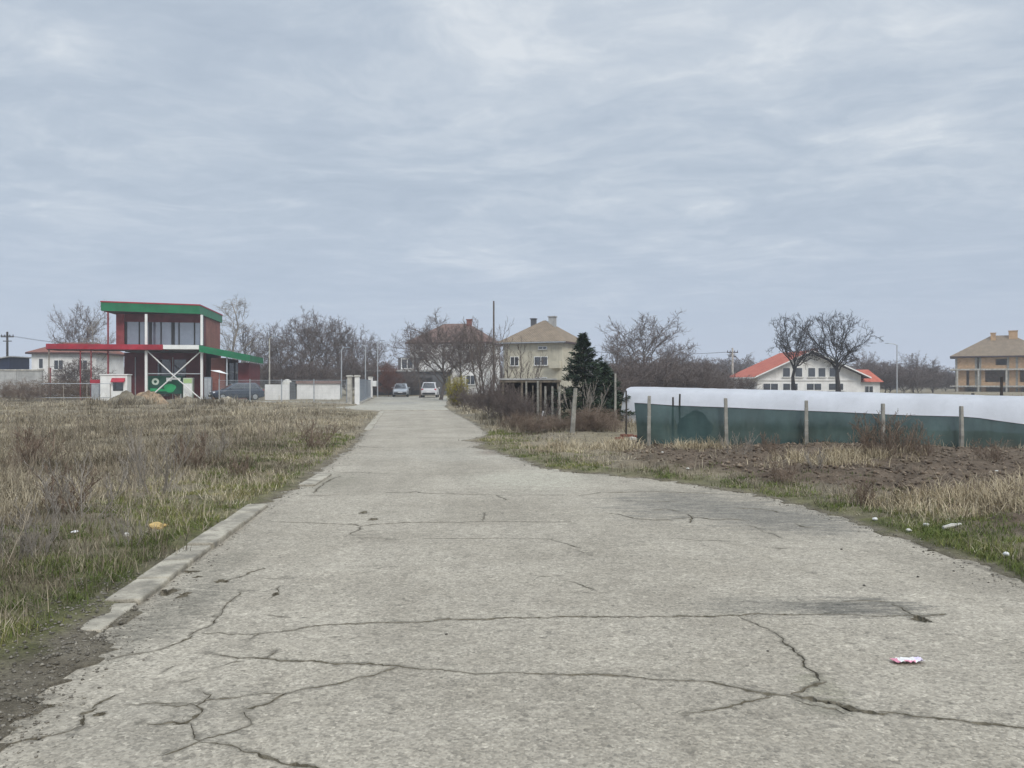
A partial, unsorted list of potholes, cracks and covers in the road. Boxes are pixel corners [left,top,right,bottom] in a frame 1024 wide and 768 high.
crack [140,632,1024,768]
crack [223,568,282,617]
crack [252,600,945,638]
crack [293,491,518,539]
